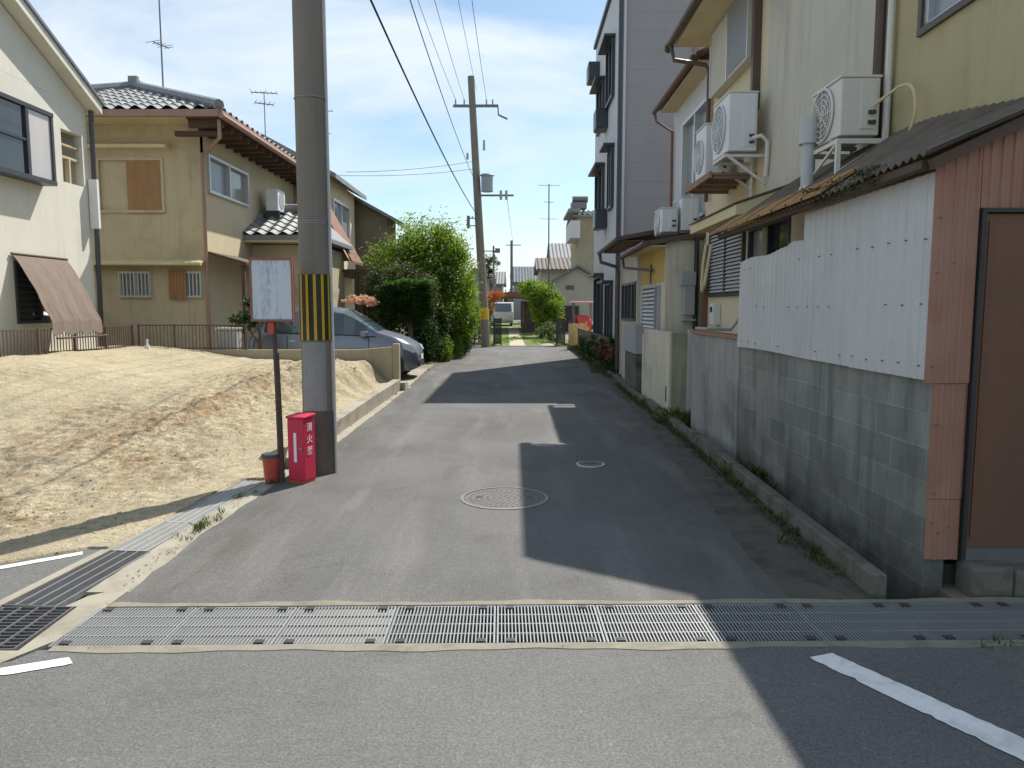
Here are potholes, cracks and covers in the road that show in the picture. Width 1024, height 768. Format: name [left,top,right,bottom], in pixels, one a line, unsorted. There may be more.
drain grate [792,603,935,641]
drain grate [596,604,716,643]
drain grate [208,480,264,499]
drain grate [165,499,233,522]
drain grate [497,605,606,643]
drain grate [694,604,826,642]
drain grate [273,606,397,645]
drain grate [48,607,198,650]
manhole cover [460,487,549,510]
drain grate [986,602,1024,626]
drain grate [162,606,298,645]
drain grate [0,606,75,651]
